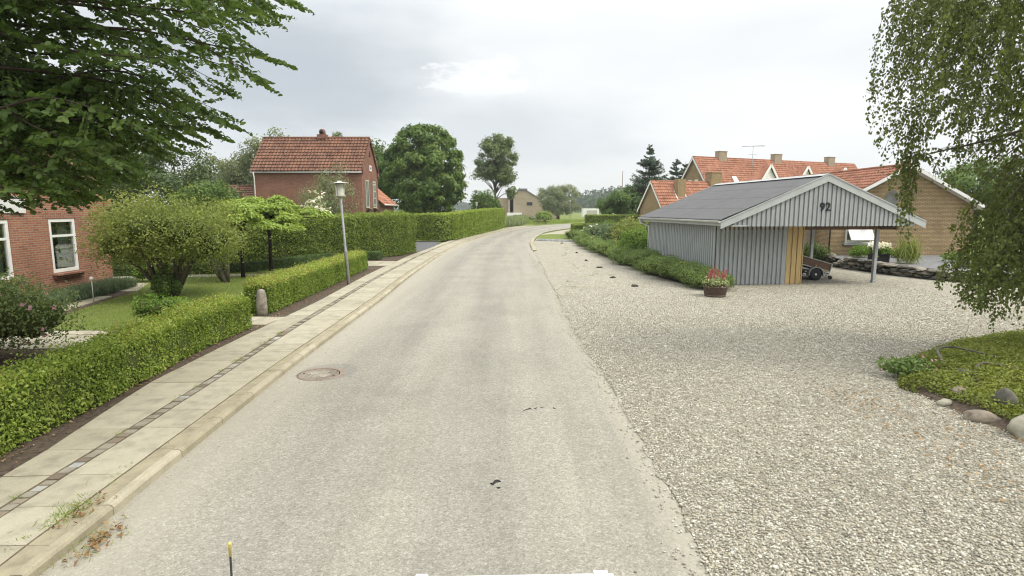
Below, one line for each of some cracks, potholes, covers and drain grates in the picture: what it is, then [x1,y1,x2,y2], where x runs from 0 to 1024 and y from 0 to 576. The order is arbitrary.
manhole cover [296,367,346,381]
